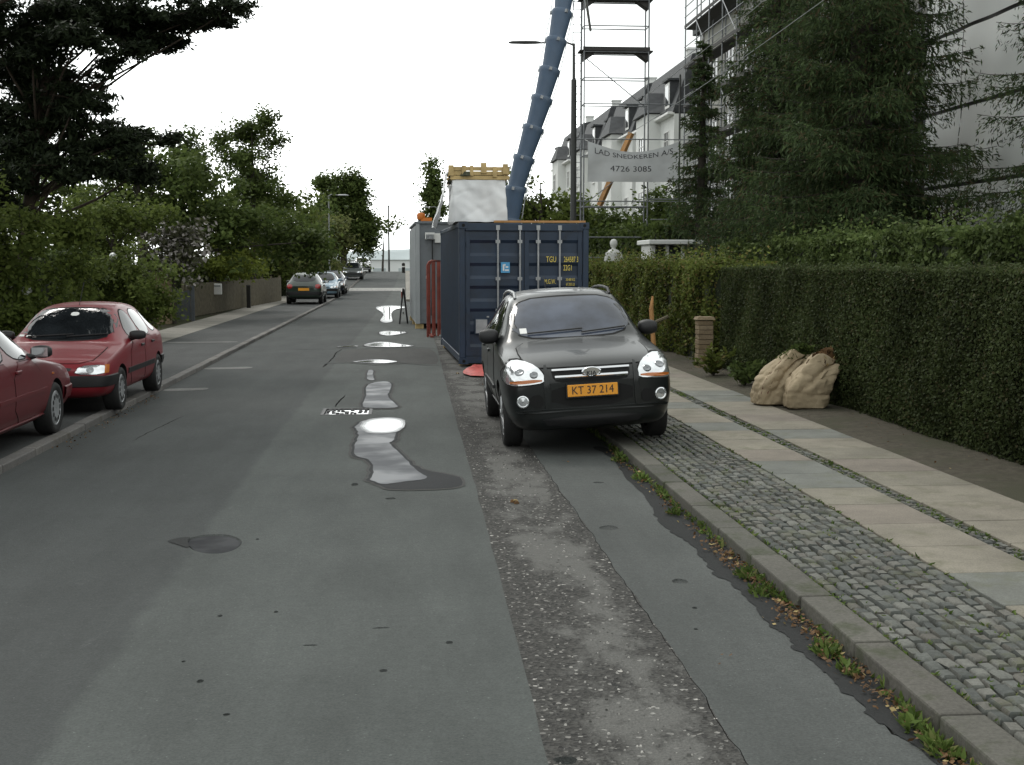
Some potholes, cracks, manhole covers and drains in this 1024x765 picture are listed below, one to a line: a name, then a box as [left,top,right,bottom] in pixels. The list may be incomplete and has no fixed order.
crack [323,348,437,367]
